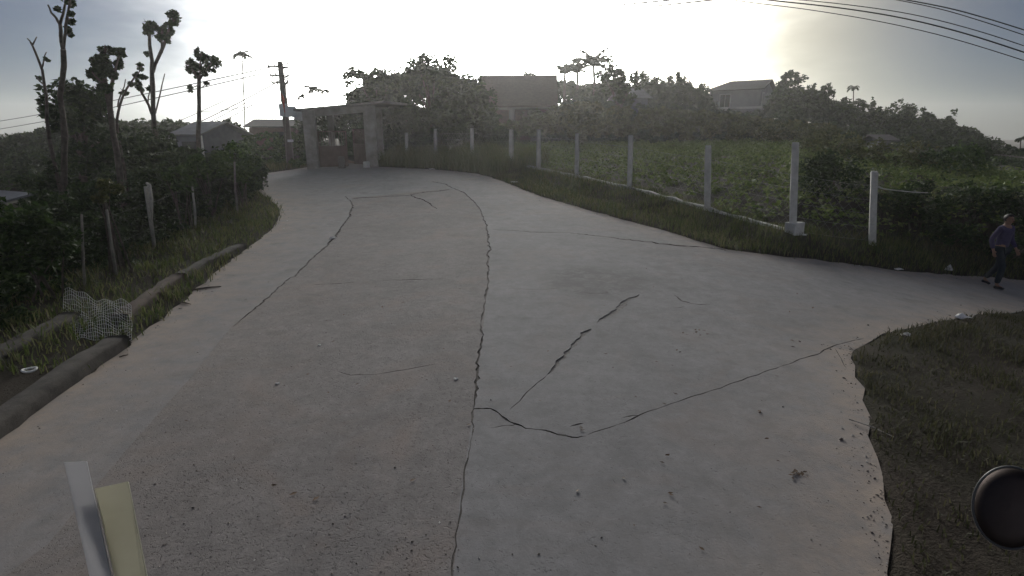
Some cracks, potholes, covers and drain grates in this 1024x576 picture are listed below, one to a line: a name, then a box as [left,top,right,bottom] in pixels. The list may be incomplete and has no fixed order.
crack [234,182,864,576]
